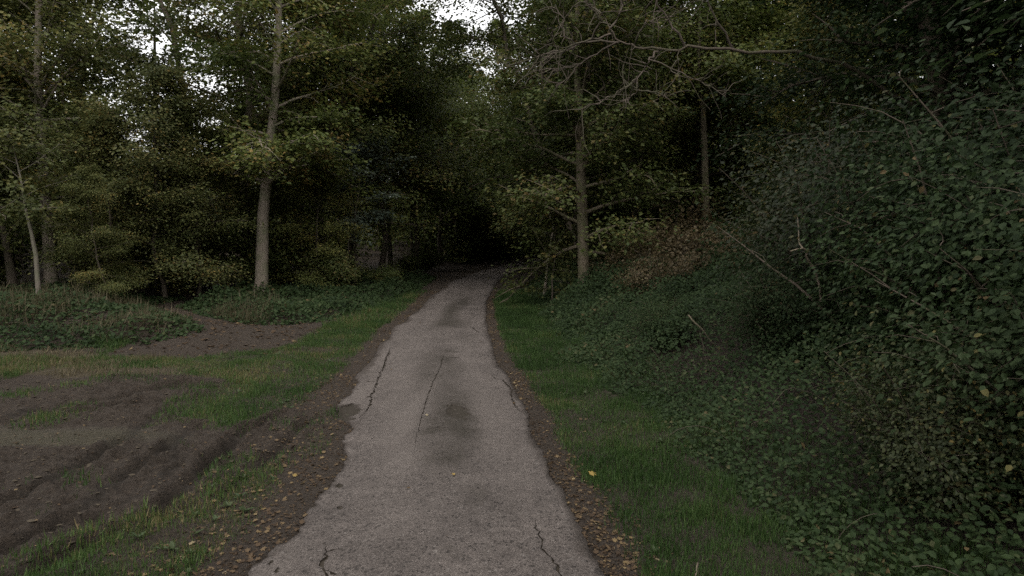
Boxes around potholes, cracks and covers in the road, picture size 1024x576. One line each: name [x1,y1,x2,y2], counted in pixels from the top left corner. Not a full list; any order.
crack [319,543,341,576]
crack [534,520,562,576]
crack [359,347,391,421]
pothole [333,403,363,423]
crack [494,377,521,412]
crack [413,351,458,454]
